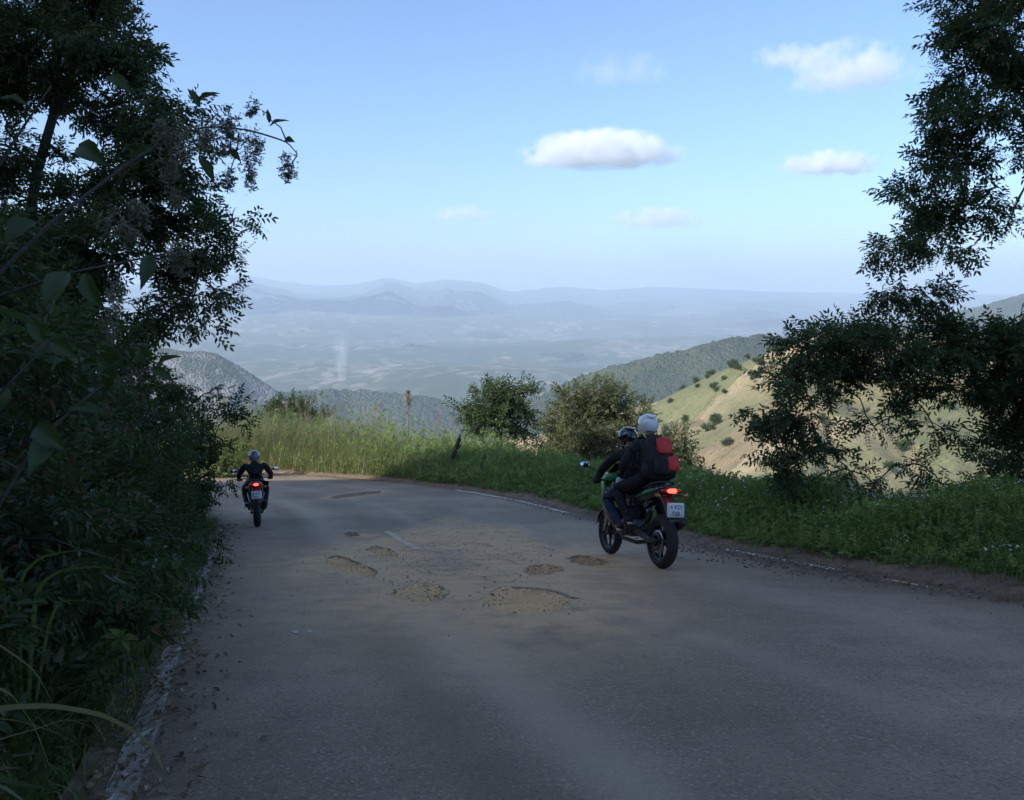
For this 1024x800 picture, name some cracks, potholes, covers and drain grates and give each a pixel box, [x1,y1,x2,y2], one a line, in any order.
pothole [464,585,596,619]
pothole [359,545,405,560]
pothole [557,554,619,568]
pothole [511,563,578,578]
pothole [315,554,383,580]
pothole [371,581,464,605]
